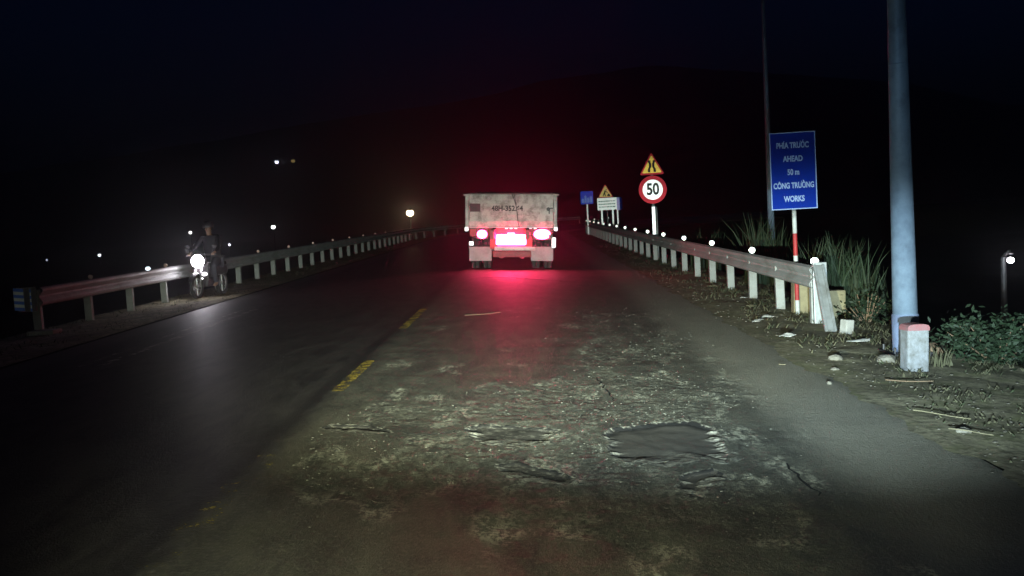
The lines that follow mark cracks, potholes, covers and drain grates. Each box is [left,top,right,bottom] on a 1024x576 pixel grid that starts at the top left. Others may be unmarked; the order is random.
pothole [320,424,394,434]
pothole [600,421,744,468]
pothole [495,461,578,485]
crack [786,463,822,495]
pothole [464,424,560,449]
pothole [668,468,728,501]
crack [568,378,614,412]
